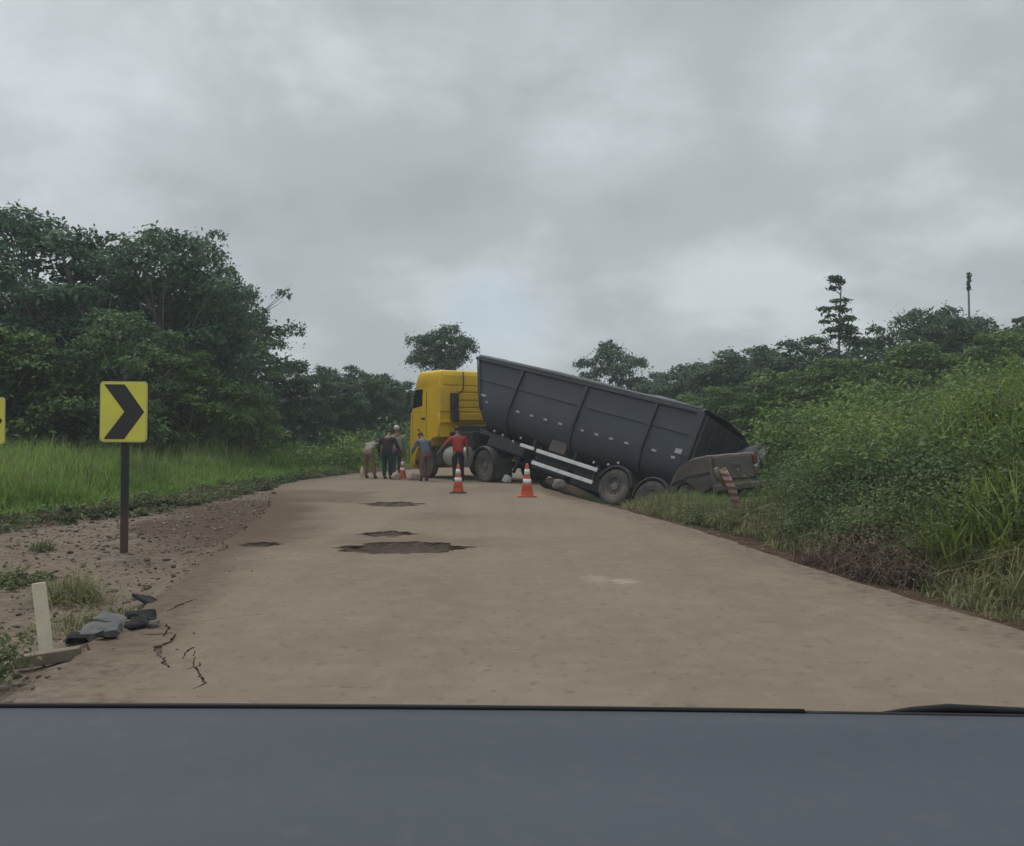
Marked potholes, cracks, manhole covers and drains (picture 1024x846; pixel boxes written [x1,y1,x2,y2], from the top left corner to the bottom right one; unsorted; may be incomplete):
pothole [335,541,475,554]
crack [141,599,256,689]
